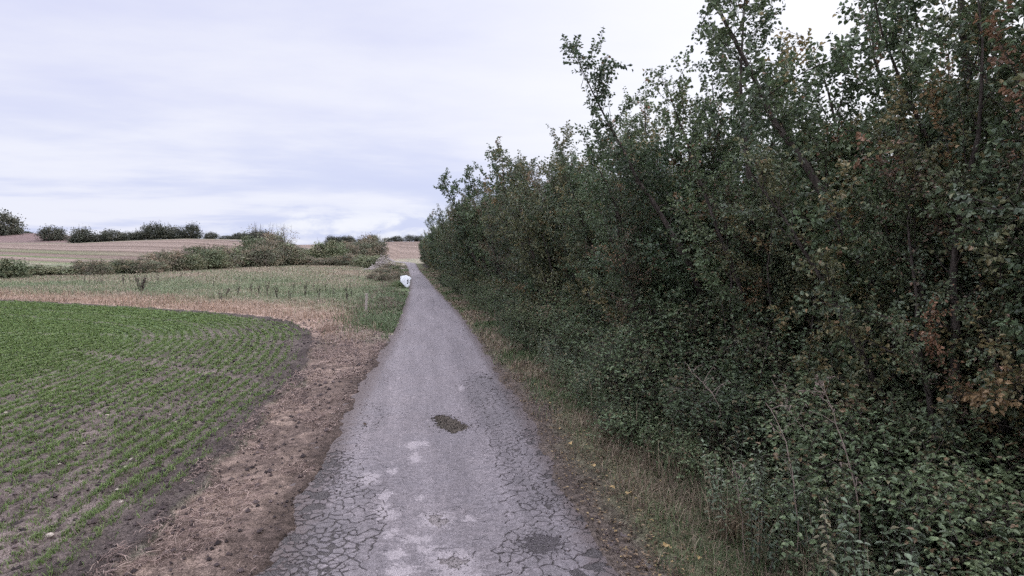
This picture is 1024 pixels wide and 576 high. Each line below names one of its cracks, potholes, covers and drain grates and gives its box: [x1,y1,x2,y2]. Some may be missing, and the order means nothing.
pothole [429,414,472,434]
crack [257,408,388,576]
crack [461,377,613,576]
